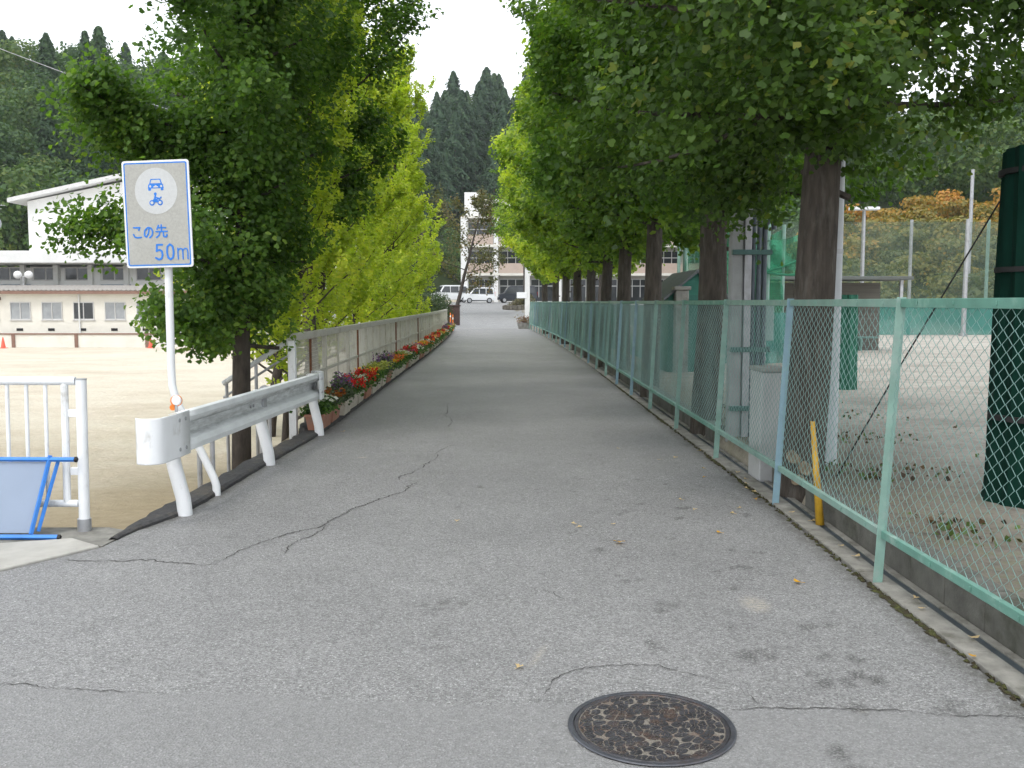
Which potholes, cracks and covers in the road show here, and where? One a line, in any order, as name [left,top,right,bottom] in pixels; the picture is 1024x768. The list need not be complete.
manhole cover [568,691,737,766]
crack [75,445,453,565]
crack [538,664,765,707]
